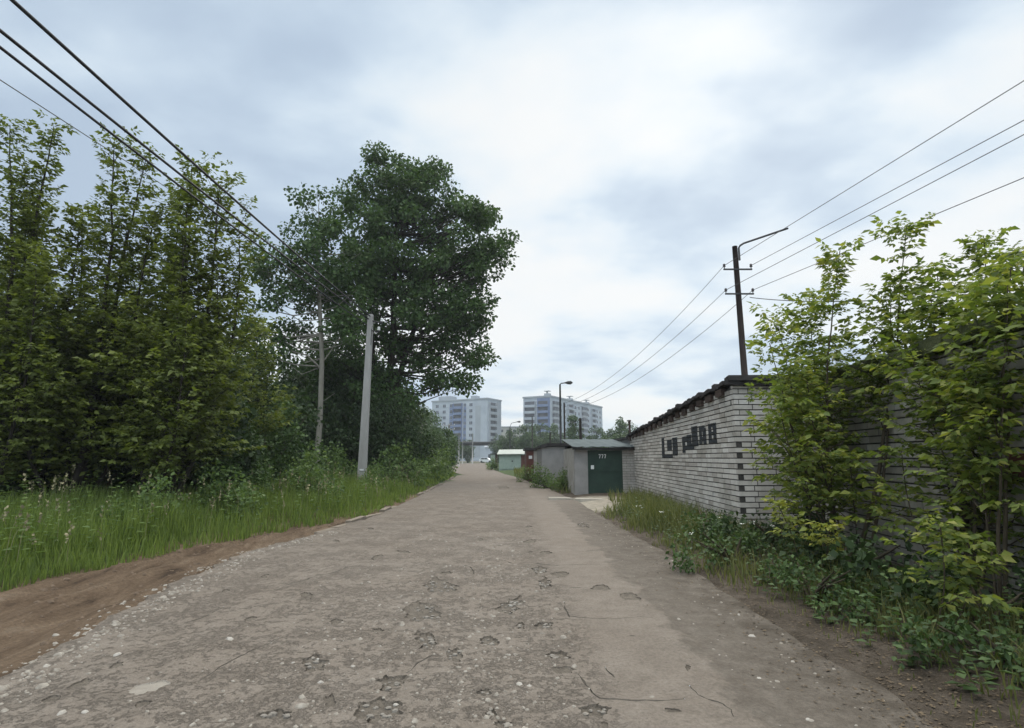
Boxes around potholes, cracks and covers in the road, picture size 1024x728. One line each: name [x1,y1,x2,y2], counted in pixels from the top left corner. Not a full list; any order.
crack [563,587,653,636]
pothole [620,592,642,600]
crack [578,667,733,715]
pothole [353,696,403,725]
pothole [494,595,526,614]
pothole [546,650,571,659]
pothole [375,675,409,691]
pothole [538,576,552,589]
pothole [479,635,500,646]
pothole [579,703,612,718]
pothole [414,630,437,649]
pothole [402,600,442,622]
